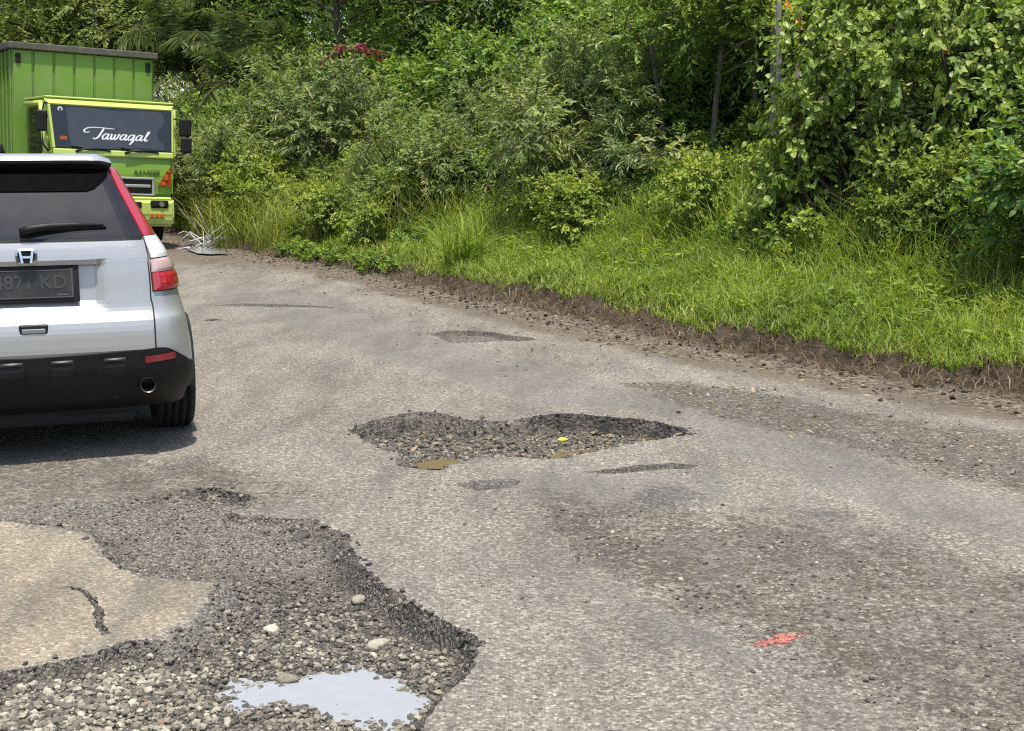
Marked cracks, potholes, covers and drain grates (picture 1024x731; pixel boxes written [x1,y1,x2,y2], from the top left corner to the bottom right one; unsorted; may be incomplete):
pothole [346,411,689,470]
crack [63,586,111,635]
pothole [0,487,487,731]
